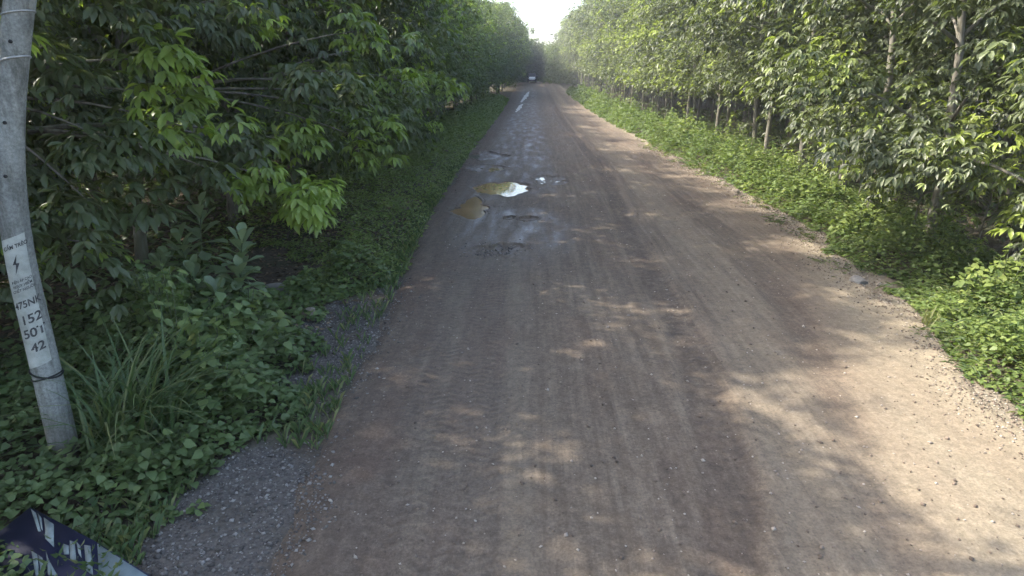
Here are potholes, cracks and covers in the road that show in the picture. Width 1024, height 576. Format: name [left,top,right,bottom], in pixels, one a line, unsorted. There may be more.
pothole [465,180,537,199]
pothole [526,174,573,187]
pothole [443,193,494,222]
pothole [467,150,516,162]
pothole [463,241,530,260]
